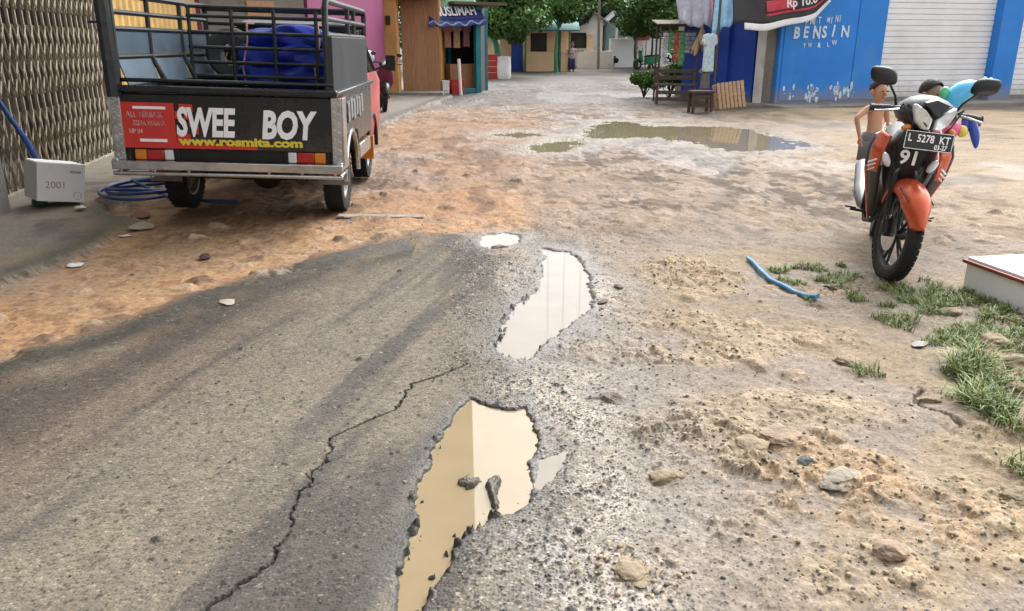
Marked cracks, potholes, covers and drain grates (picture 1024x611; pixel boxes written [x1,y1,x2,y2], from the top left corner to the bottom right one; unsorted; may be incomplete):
pothole [509,137,604,156]
pothole [530,444,580,493]
pothole [381,394,548,611]
pothole [568,119,816,154]
pothole [482,246,605,365]
crack [910,388,967,429]
pothole [472,231,528,250]
crack [190,361,472,611]
